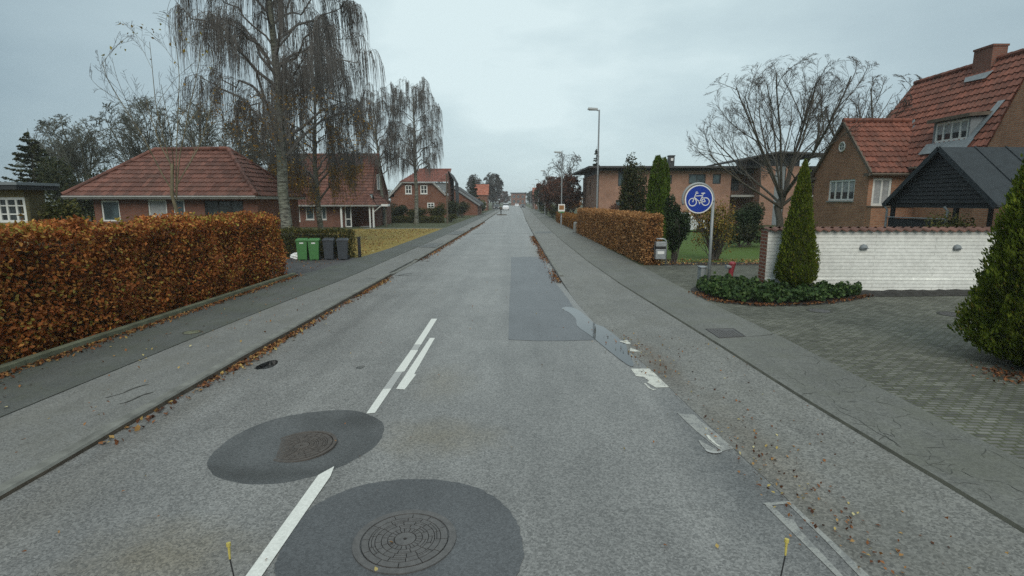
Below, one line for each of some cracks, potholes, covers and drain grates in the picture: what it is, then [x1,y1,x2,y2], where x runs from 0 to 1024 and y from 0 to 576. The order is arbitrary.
manhole cover [352,510,456,575]
crack [106,384,152,404]
pothole [253,360,278,370]
manhole cover [706,328,746,338]
manhole cover [273,431,337,462]
